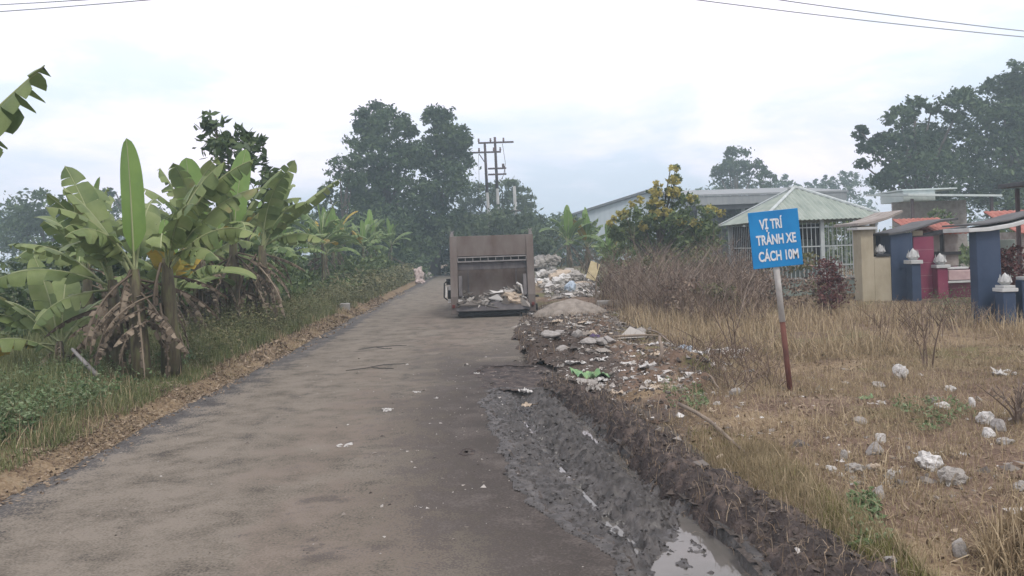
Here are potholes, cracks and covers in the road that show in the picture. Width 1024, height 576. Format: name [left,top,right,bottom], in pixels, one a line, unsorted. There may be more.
pothole [477,387,777,576]
pothole [467,364,557,391]
crack [346,345,406,371]
